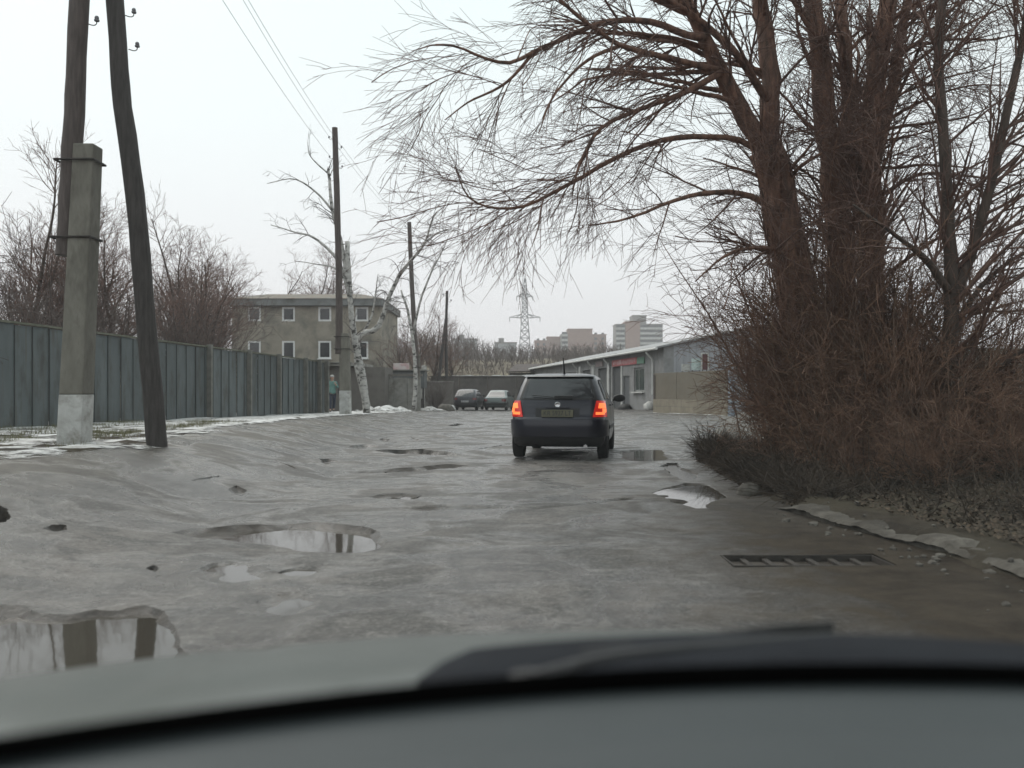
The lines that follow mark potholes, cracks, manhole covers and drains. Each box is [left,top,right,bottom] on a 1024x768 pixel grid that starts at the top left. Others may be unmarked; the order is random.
pothole [171,522,387,553]
pothole [349,464,470,473]
pothole [0,604,189,679]
pothole [227,485,247,495]
pothole [43,524,67,532]
pothole [375,449,465,457]
pothole [255,591,323,616]
pothole [0,506,11,523]
pothole [619,449,669,461]
pothole [652,483,728,511]
pothole [195,560,282,585]
drain grate [720,555,894,567]
